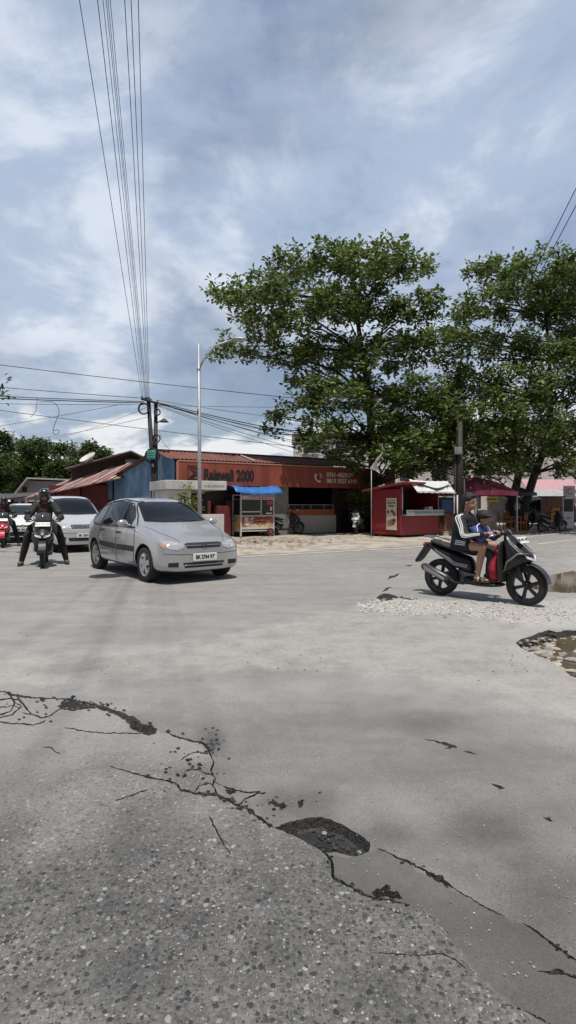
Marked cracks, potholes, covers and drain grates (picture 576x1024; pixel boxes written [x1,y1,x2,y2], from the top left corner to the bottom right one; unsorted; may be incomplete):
crack [323,848,504,968]
pothole [516,630,576,678]
pothole [273,817,370,856]
crack [0,691,322,854]
crack [523,923,576,979]
